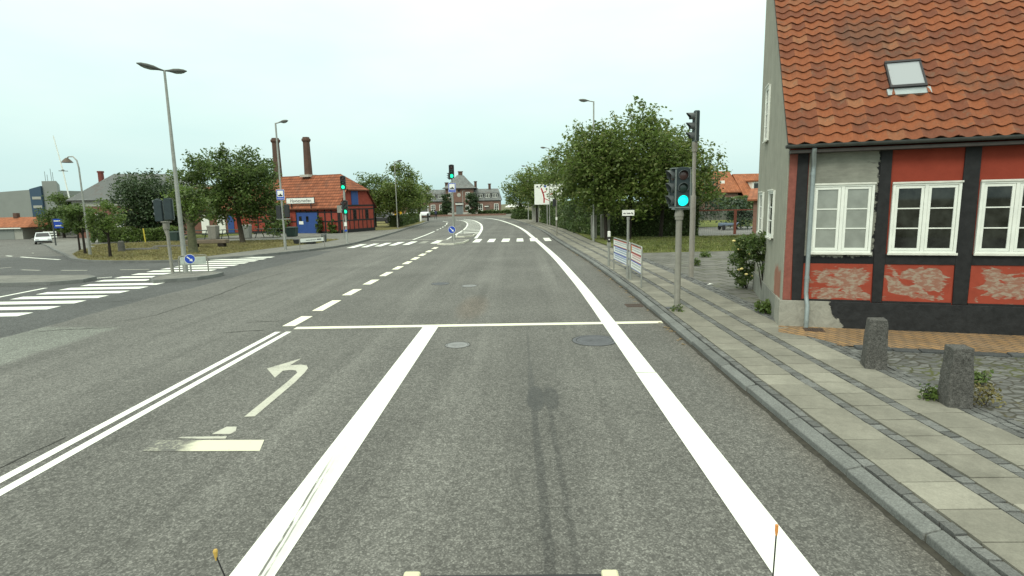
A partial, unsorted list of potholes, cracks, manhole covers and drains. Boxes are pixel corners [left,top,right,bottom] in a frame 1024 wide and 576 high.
crack [0,436,67,468]
manhole cover [572,335,615,346]
